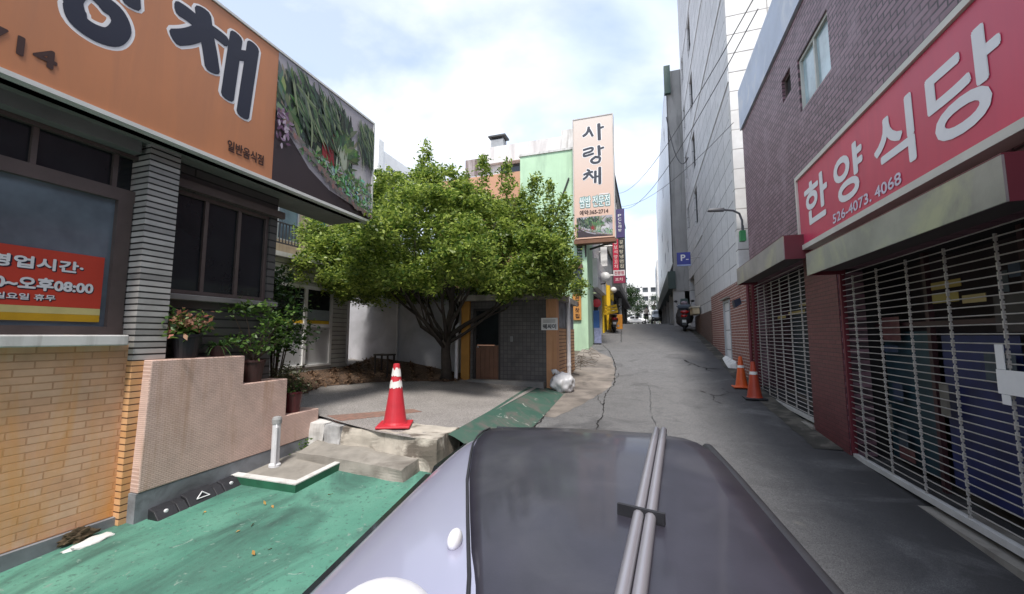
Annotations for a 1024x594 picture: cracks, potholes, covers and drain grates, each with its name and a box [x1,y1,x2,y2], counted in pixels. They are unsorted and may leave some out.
crack [596,330,622,429]
